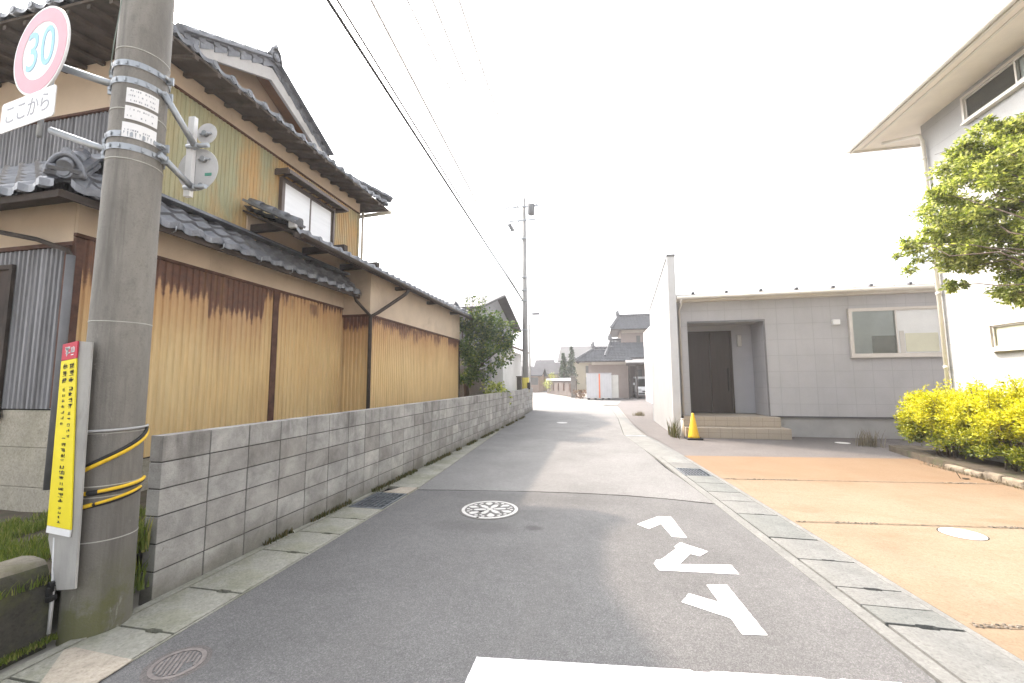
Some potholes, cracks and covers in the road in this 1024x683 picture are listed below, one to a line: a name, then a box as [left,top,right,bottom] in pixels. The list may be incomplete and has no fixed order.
manhole cover [936,527,990,541]
drain grate [676,468,712,476]
manhole cover [139,645,213,683]
manhole cover [459,500,521,520]
drain grate [349,492,407,509]
